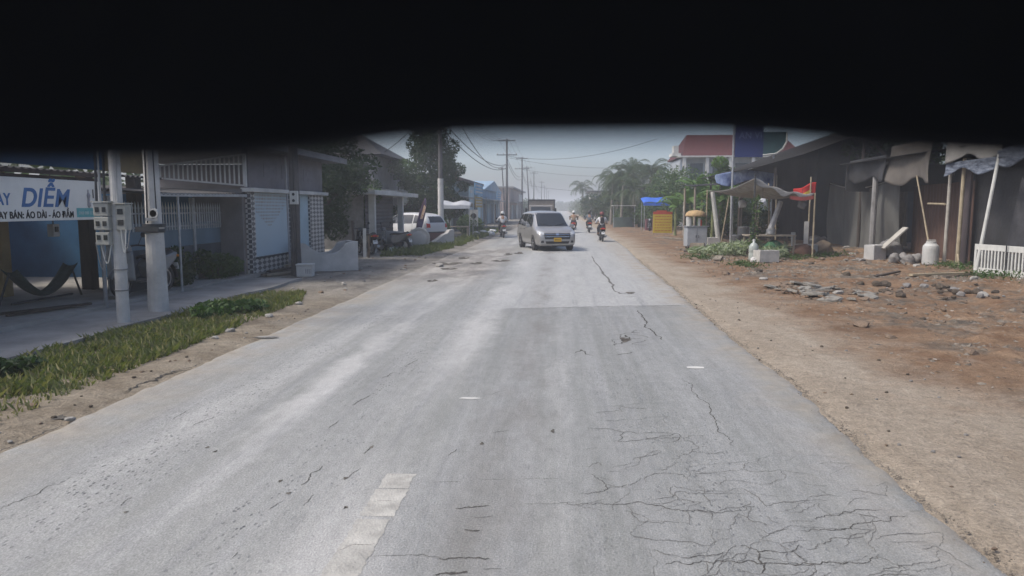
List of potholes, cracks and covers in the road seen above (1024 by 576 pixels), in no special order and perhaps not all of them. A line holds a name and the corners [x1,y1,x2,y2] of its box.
crack [534,381,976,576]
crack [592,257,662,355]
